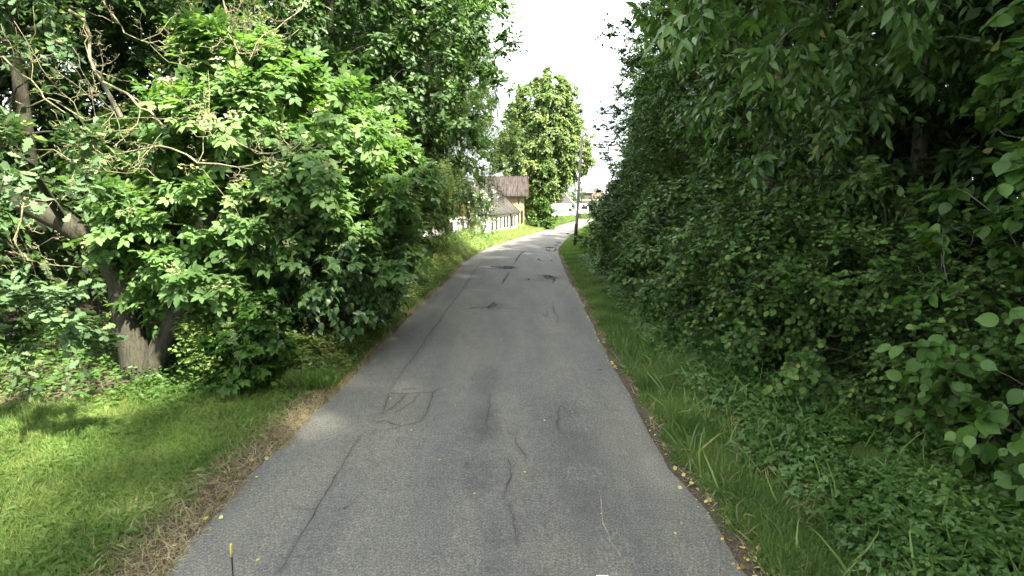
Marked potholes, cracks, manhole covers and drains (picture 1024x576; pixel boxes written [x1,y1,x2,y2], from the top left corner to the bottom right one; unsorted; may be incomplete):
crack [279,445,354,571]
crack [503,248,557,282]
crack [503,438,527,540]
crack [373,389,438,430]
